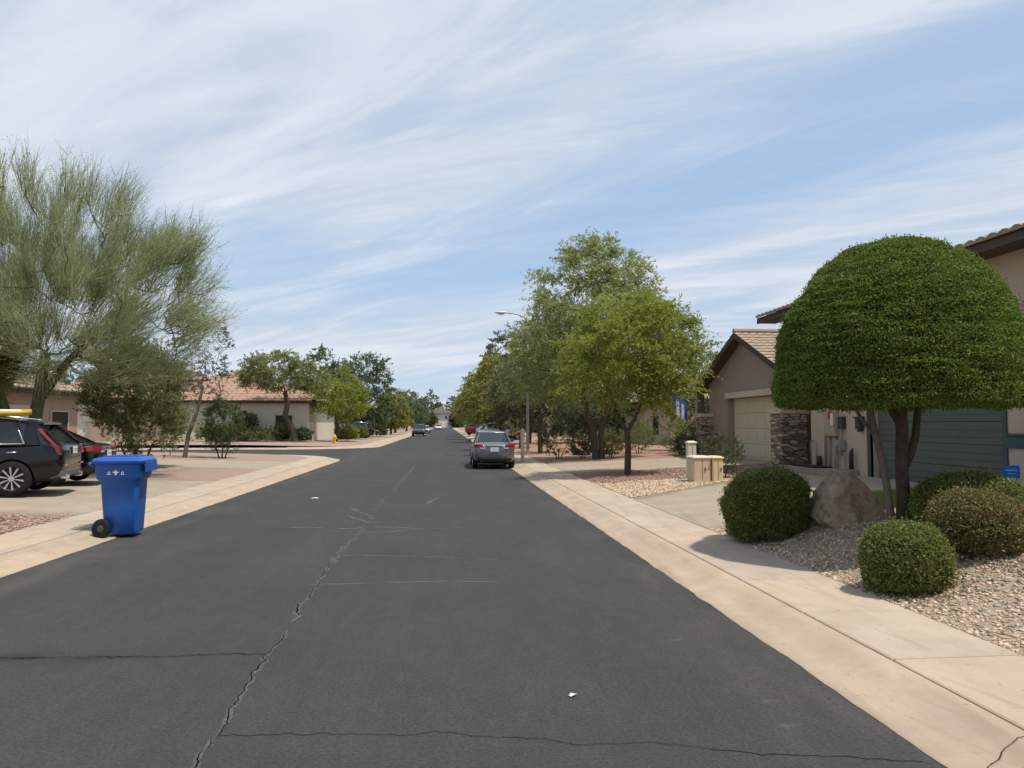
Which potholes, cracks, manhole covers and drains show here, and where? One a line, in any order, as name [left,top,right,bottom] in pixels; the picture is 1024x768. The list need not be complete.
crack [0,464,923,768]
